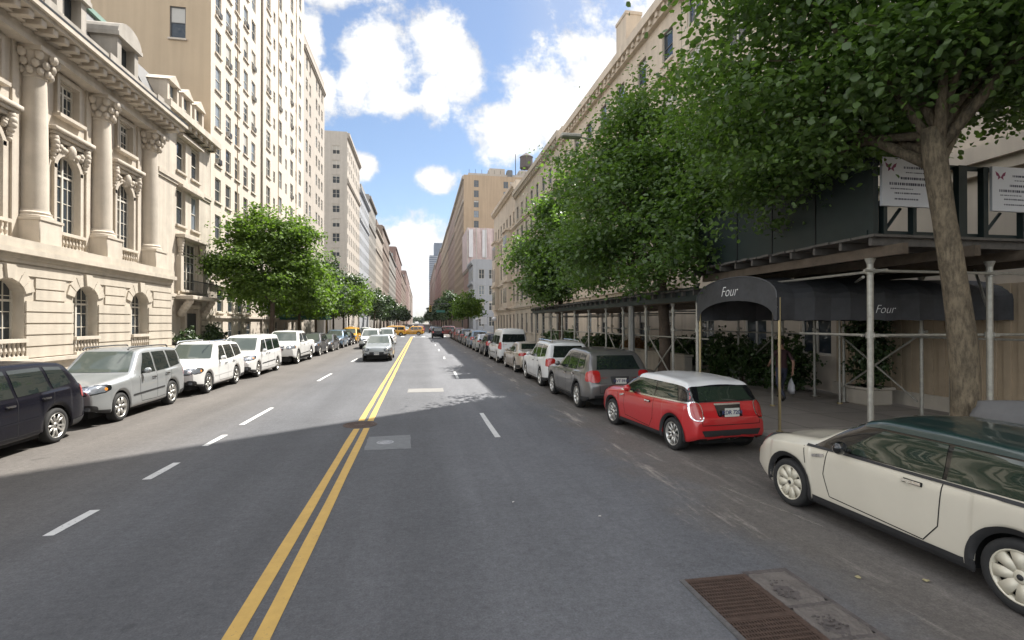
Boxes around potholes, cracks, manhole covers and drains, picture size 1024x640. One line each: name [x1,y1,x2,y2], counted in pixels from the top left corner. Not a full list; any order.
drain grate [679,568,892,640]
